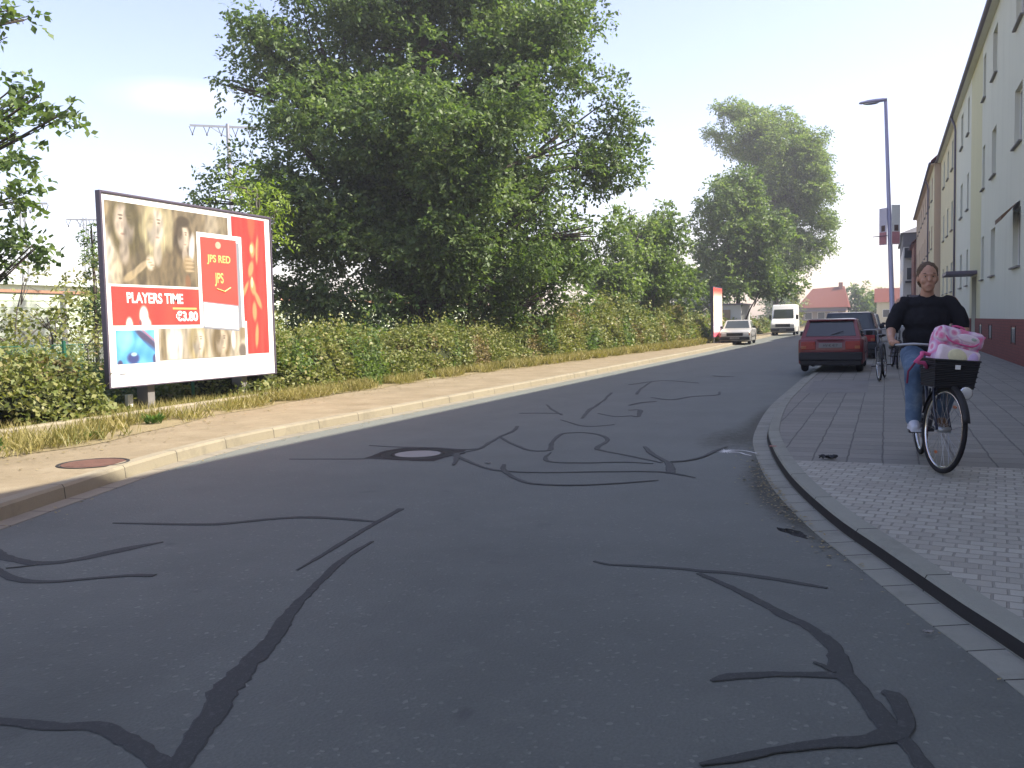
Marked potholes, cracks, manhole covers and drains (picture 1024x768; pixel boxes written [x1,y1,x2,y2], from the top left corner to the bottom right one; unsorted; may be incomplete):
manhole cover [56,458,130,469]
pothole [777,527,808,539]
manhole cover [366,448,466,461]
